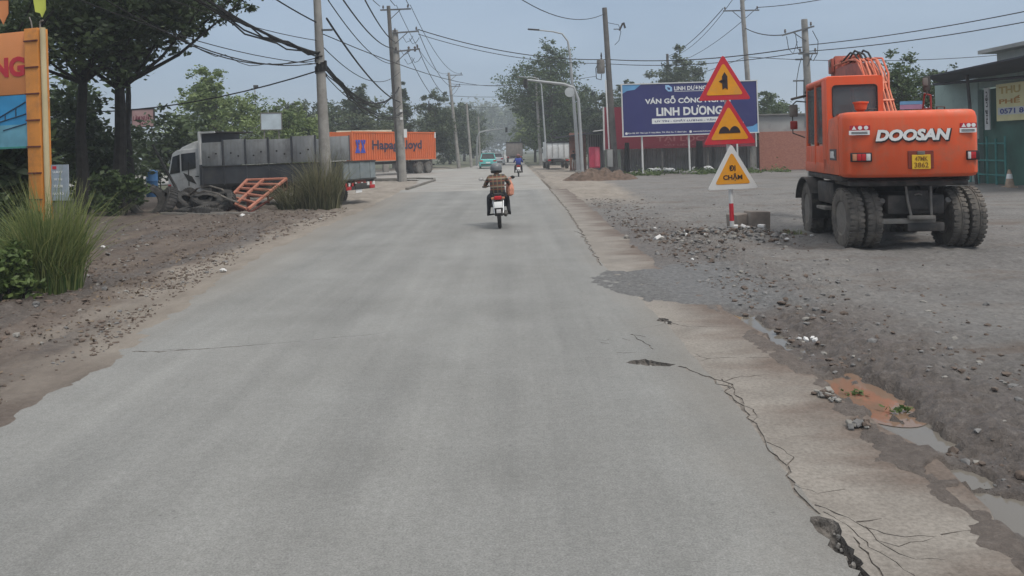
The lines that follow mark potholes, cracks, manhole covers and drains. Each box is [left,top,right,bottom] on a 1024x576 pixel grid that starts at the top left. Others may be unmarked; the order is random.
pothole [810,516,870,576]
crack [600,321,727,353]
crack [677,353,970,576]
